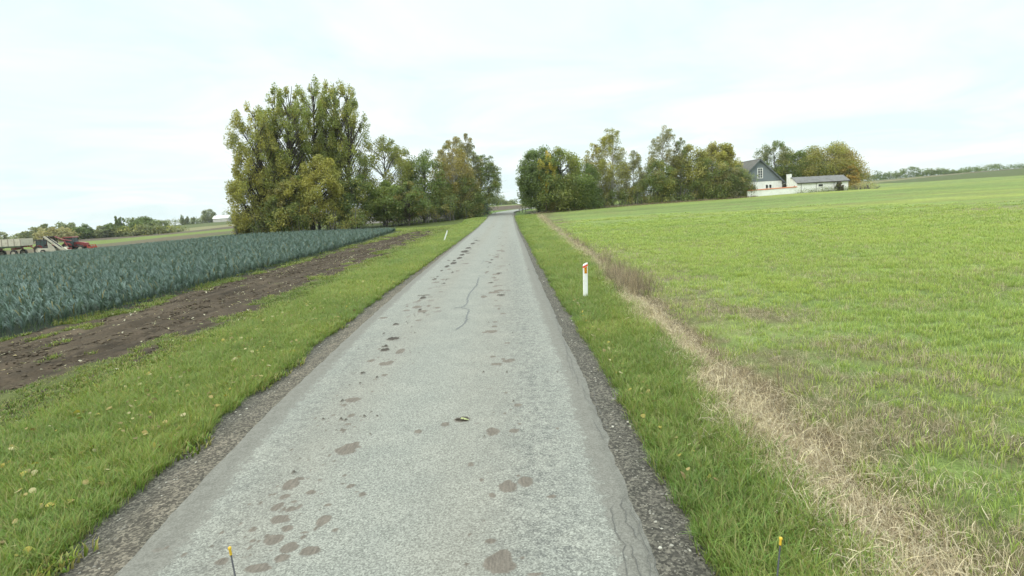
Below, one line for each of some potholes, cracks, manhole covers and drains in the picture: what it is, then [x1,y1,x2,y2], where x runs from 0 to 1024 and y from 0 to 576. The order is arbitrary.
crack [456,278,479,330]
crack [610,497,658,576]
